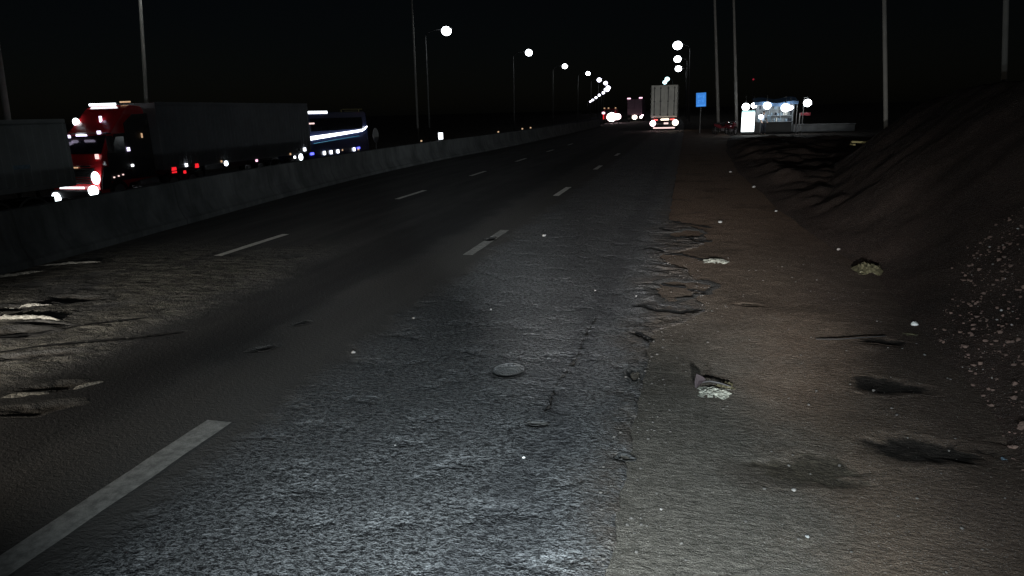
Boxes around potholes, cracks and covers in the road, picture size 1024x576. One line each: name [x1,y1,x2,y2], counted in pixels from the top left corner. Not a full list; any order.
pothole [0,397,92,418]
crack [544,318,597,414]
pothole [834,370,954,399]
pothole [7,378,93,393]
crack [637,284,713,313]
manhole cover [490,362,526,379]
pothole [0,304,43,312]
crack [0,317,183,353]
pothole [832,426,1021,471]
